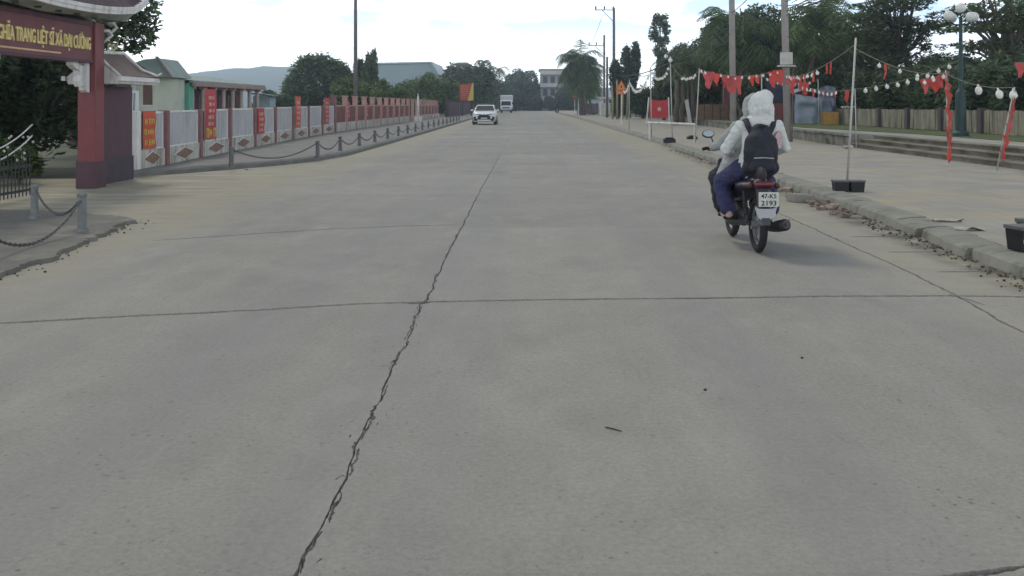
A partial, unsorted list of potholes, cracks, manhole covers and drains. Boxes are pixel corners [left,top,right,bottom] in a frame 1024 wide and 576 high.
crack [0,135,1024,576]
